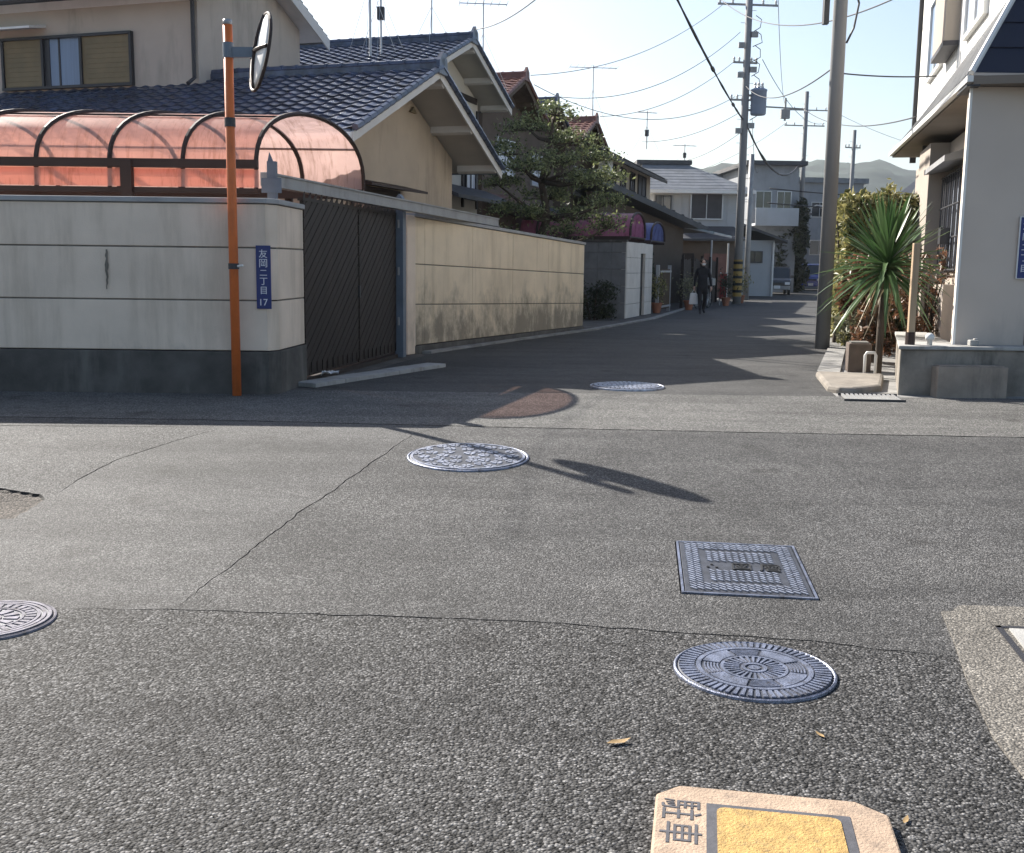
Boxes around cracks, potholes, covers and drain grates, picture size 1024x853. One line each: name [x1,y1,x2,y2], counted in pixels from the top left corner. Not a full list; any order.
manhole cover [0,600,58,640]
manhole cover [676,541,819,601]
manhole cover [407,443,529,472]
drain grate [838,393,906,402]
manhole cover [673,641,838,704]
manhole cover [590,381,664,391]
